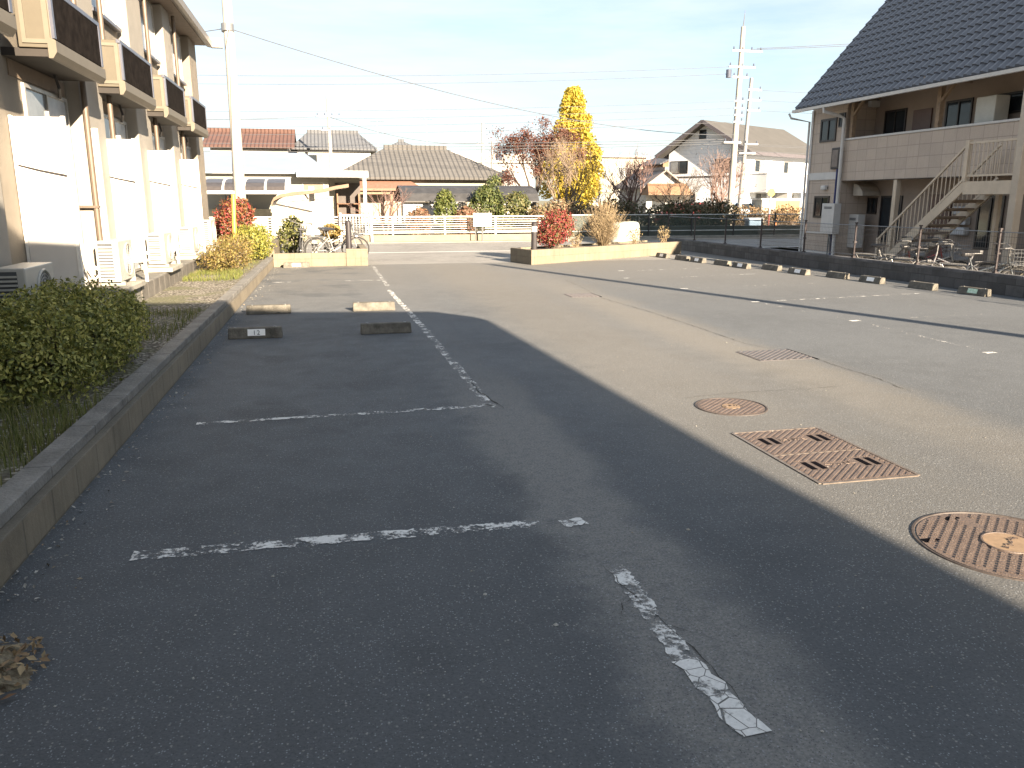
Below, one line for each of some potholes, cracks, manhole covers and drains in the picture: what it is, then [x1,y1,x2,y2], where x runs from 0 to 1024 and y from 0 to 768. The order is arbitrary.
manhole cover [911,511,1024,582]
manhole cover [694,398,768,416]
